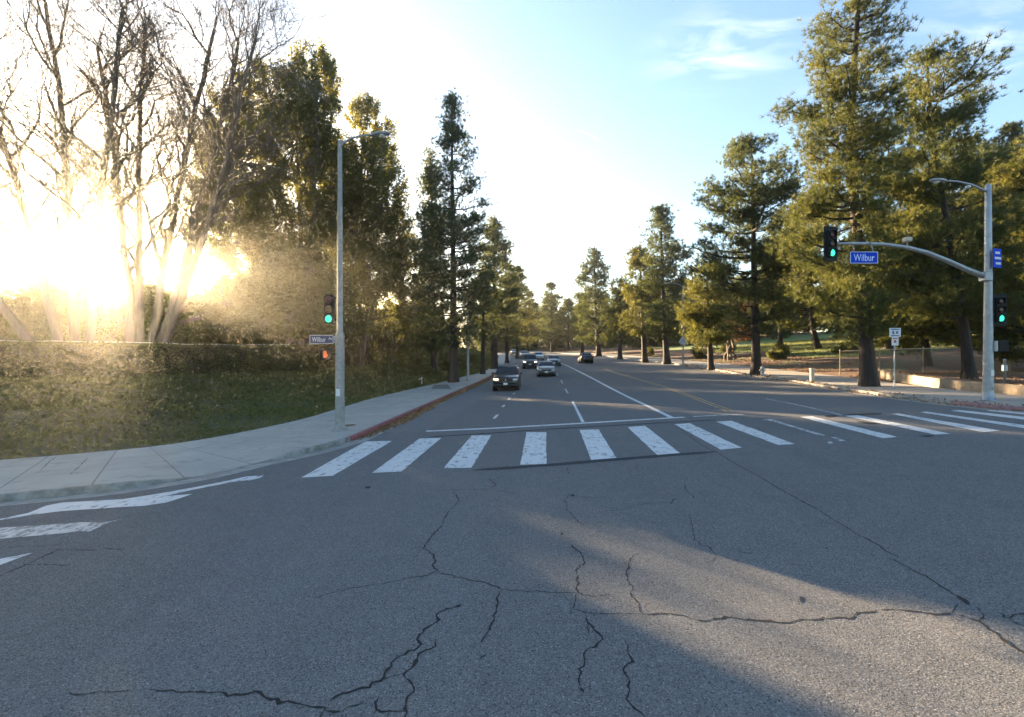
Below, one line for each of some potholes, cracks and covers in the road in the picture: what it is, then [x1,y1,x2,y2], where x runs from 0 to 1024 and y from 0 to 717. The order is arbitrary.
crack [151,604,462,717]
crack [0,544,119,576]
crack [622,640,645,716]
crack [316,425,1024,685]
